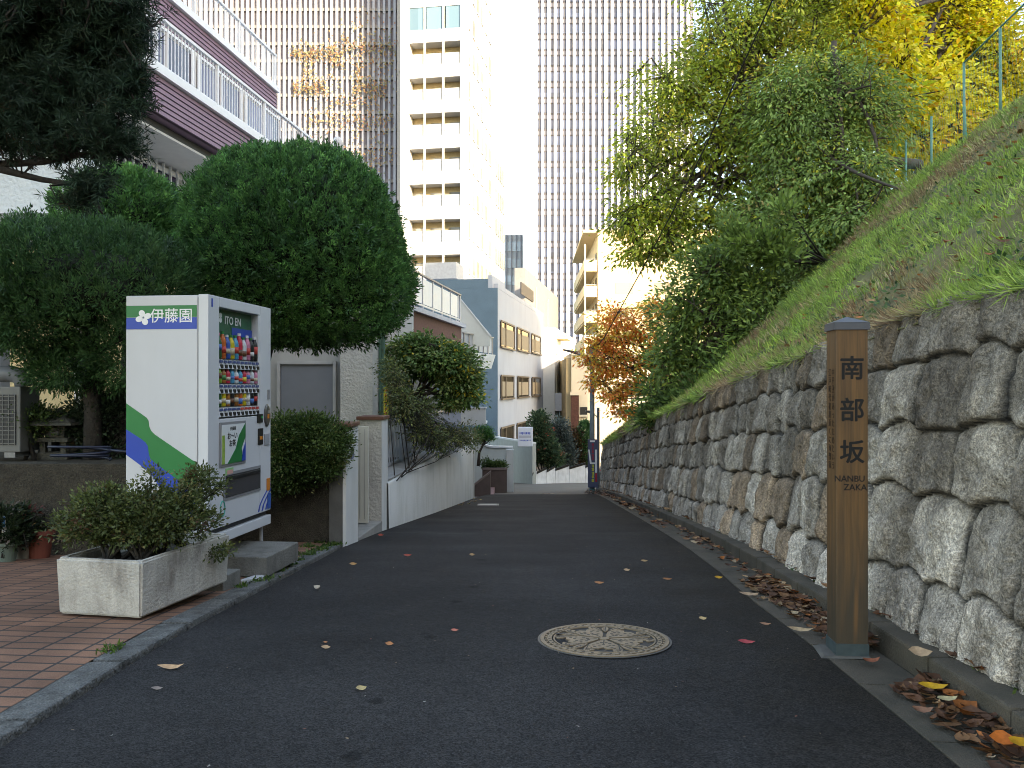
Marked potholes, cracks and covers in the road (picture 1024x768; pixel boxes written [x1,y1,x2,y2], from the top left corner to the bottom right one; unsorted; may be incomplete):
manhole cover [538,623,672,659]
